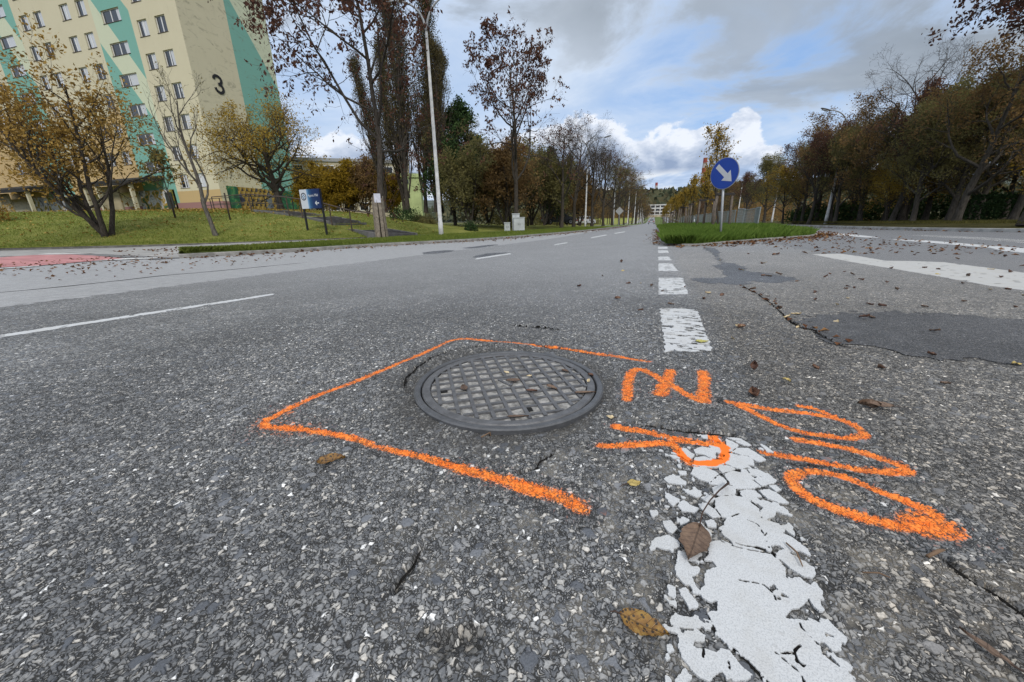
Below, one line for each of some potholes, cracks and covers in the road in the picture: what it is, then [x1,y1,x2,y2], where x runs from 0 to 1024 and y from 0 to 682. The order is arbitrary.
crack [395,549,422,591]
manhole cover [414,351,603,436]
crack [404,345,495,388]
crack [947,562,1024,616]
